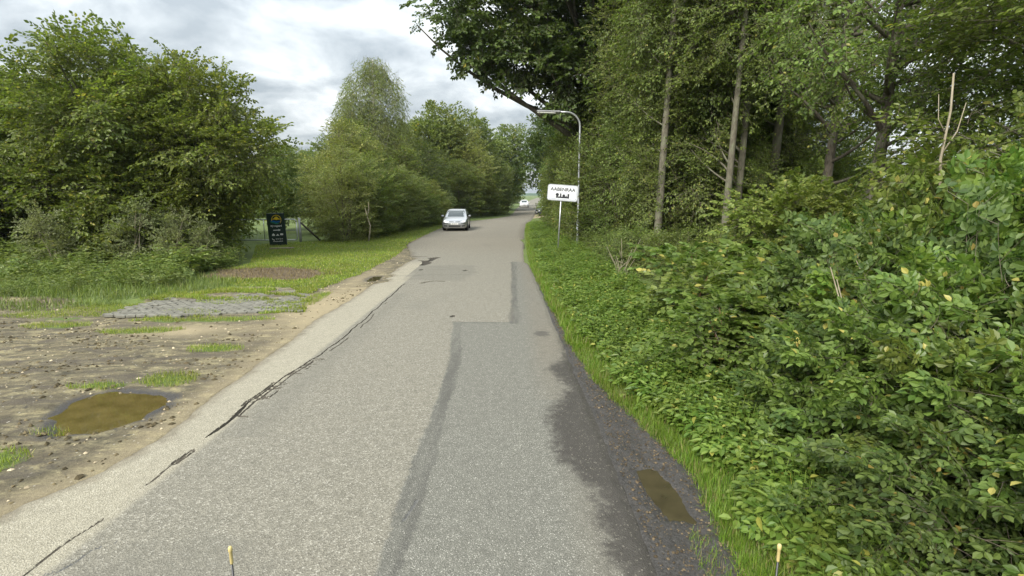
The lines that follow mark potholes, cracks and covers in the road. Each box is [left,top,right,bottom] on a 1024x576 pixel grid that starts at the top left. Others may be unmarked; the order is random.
crack [146,284,404,486]
crack [23,518,117,576]
